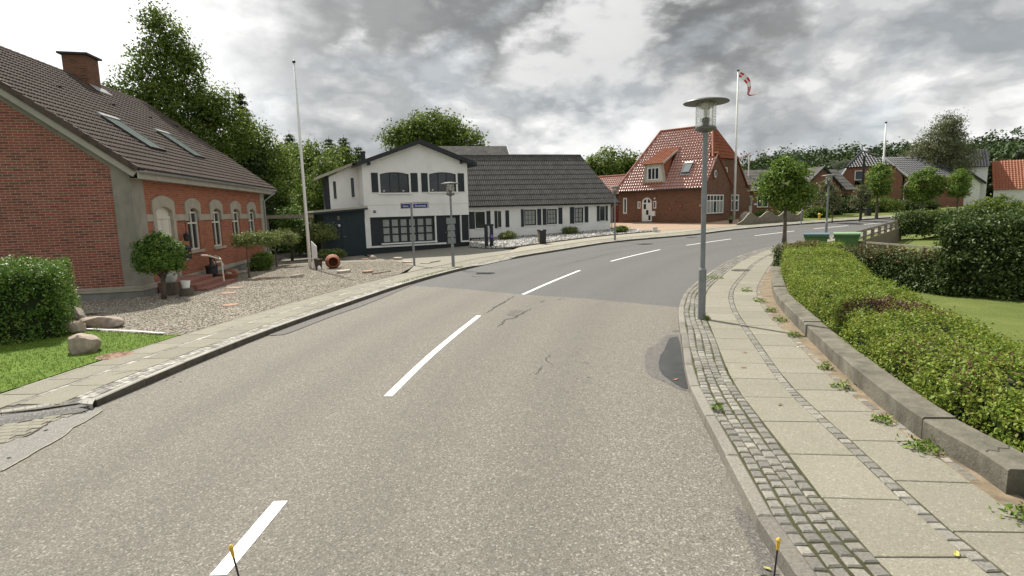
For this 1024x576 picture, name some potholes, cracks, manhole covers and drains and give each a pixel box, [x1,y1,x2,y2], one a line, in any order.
crack [486,296,565,326]
